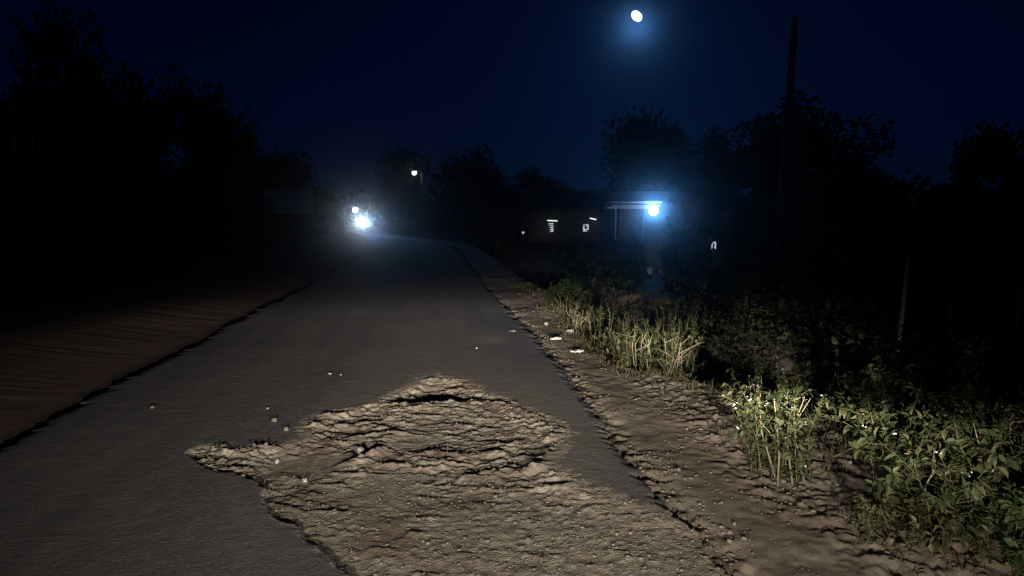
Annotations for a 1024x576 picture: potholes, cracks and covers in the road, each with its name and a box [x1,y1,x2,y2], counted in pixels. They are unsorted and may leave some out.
pothole [183,370,731,576]
